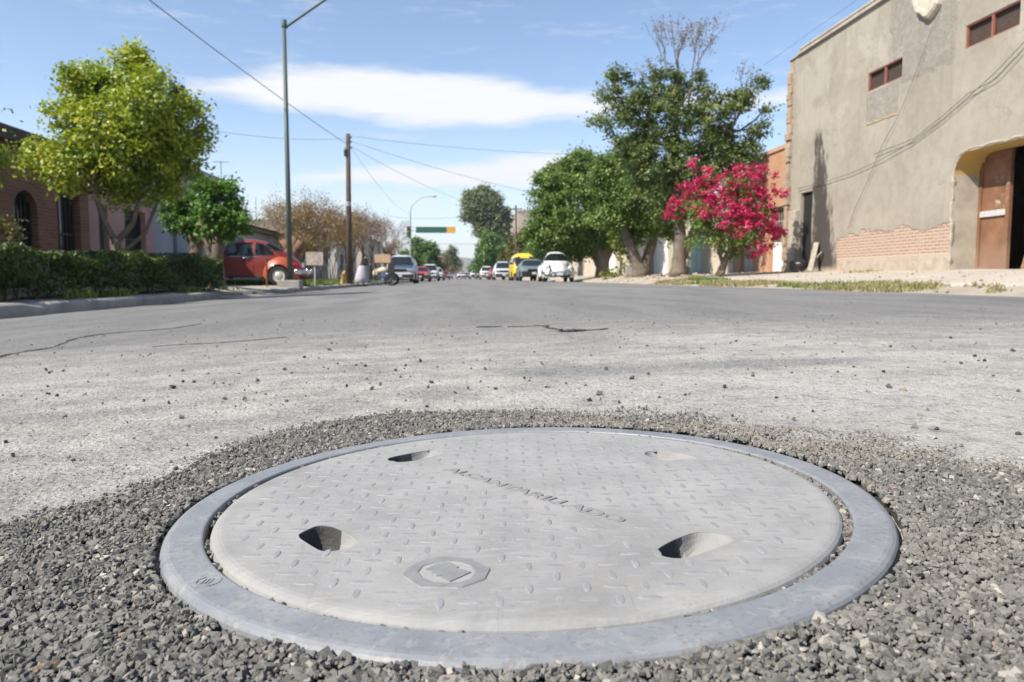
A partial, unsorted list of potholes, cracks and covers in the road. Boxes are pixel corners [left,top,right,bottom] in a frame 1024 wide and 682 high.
manhole cover [159,427,900,678]
crack [0,323,286,357]
